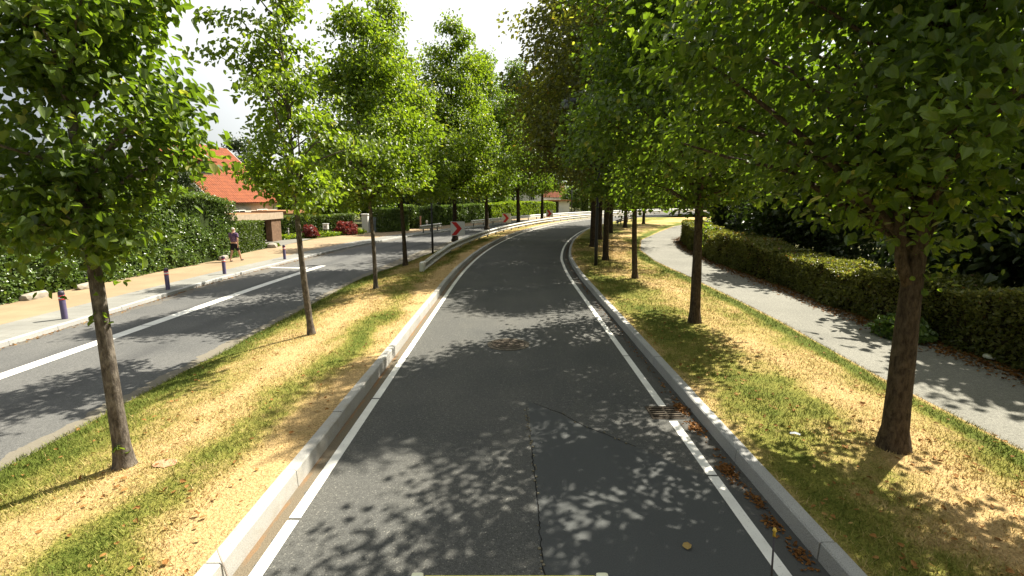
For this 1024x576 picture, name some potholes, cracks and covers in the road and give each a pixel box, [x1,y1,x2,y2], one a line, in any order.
manhole cover [487,338,529,351]
crack [524,403,634,575]
drain grate [645,406,687,419]
